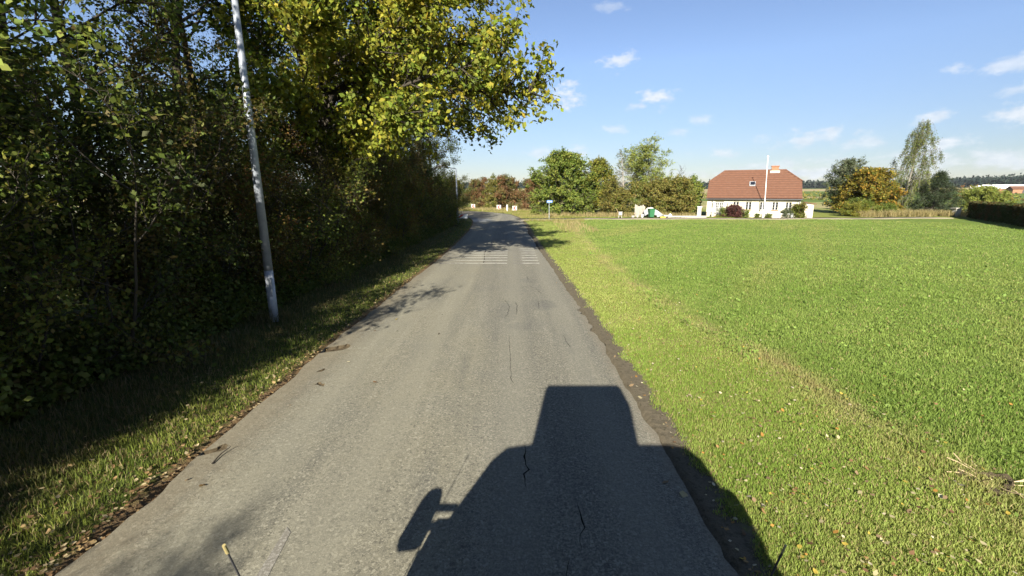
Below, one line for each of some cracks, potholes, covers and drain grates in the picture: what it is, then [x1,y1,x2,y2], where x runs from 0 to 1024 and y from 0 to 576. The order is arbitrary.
crack [566,503,585,576]
